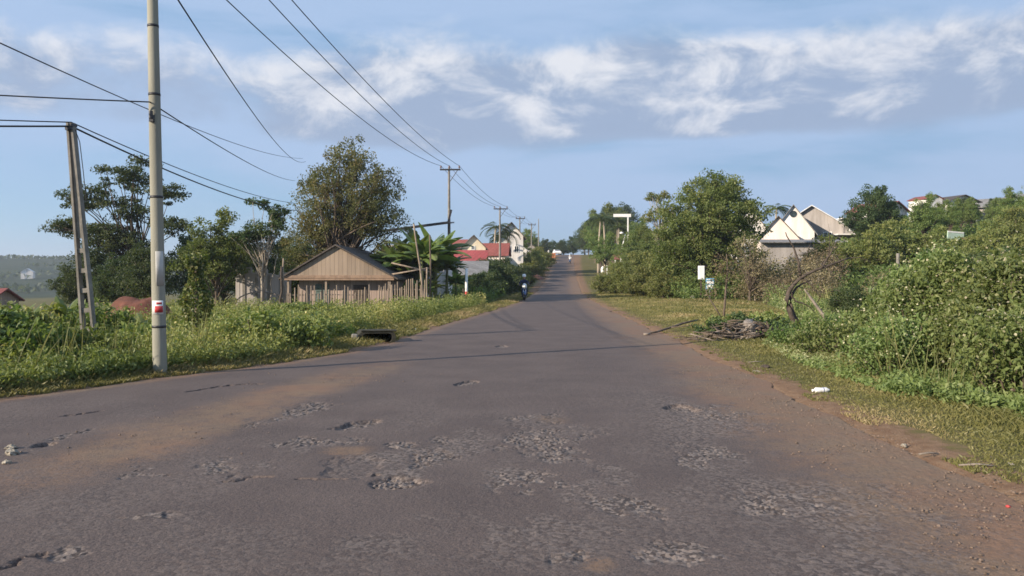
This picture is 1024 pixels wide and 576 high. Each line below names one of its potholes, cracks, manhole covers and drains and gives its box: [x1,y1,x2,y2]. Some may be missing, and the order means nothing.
pothole [365,475,437,490]
pothole [662,403,704,413]
pothole [327,419,386,430]
